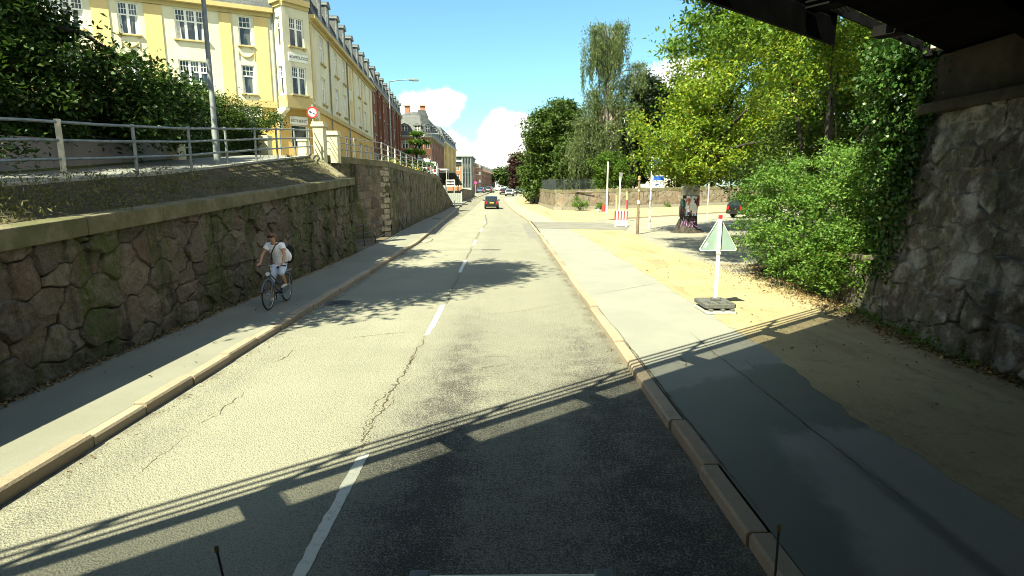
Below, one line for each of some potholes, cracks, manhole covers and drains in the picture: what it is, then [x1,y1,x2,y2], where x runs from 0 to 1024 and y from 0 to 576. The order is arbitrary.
crack [357,337,426,453]
